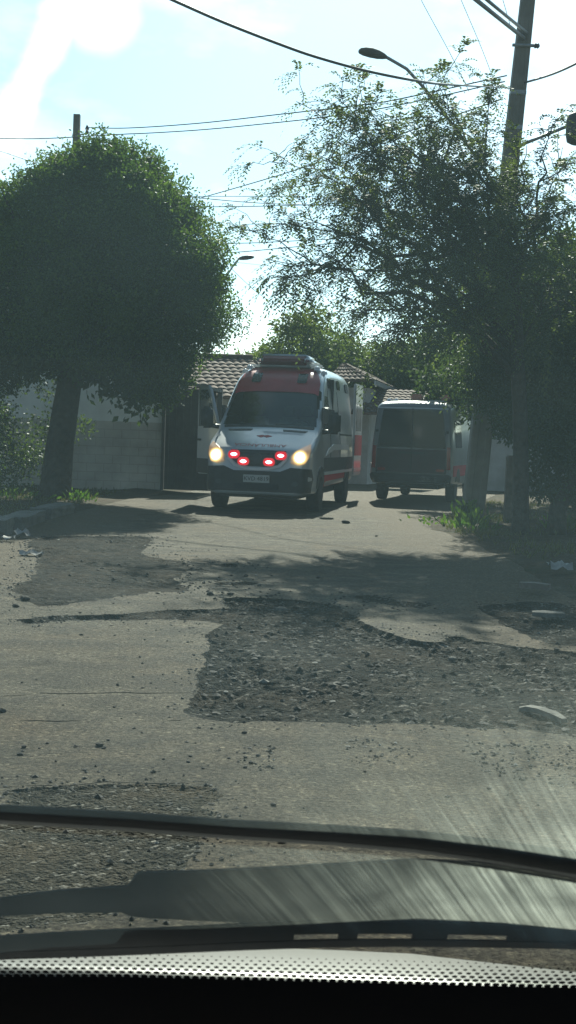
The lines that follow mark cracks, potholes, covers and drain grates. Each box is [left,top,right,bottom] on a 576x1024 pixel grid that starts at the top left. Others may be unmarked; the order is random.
pothole [16,597,576,737]
